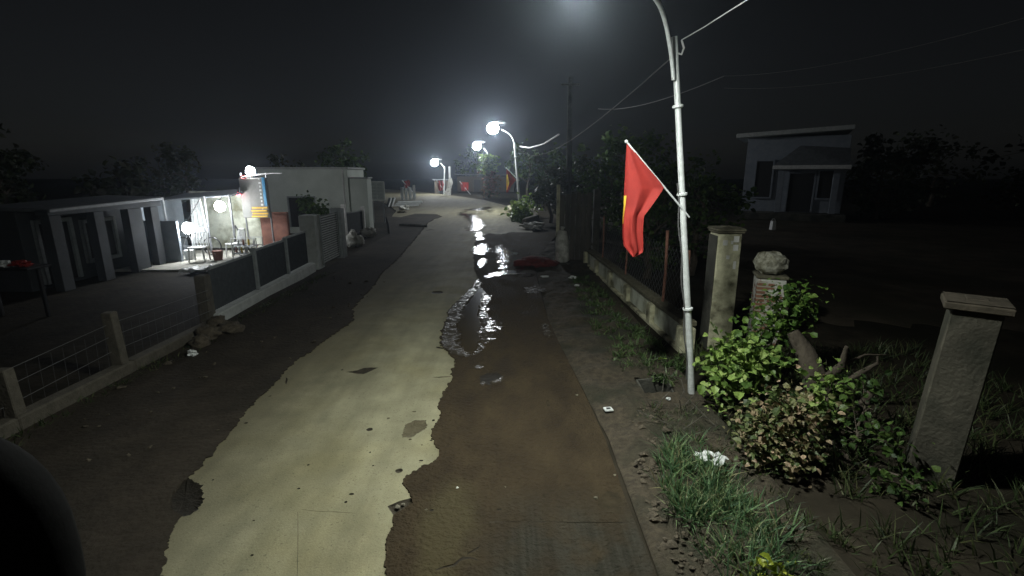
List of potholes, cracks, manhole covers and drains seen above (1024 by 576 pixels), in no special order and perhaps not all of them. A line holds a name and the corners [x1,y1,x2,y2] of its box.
pothole [172,479,205,516]
pothole [387,498,412,515]
crack [436,546,480,570]
